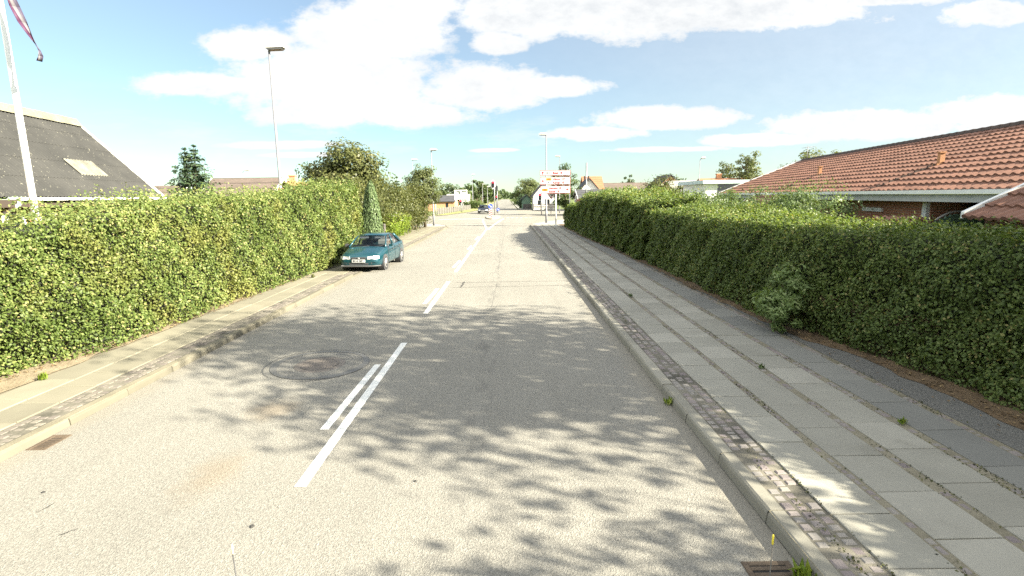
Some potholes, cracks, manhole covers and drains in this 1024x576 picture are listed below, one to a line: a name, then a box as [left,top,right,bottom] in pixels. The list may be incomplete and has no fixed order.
drain grate [741,561,800,576]
drain grate [26,434,72,450]
manhole cover [294,357,346,373]
